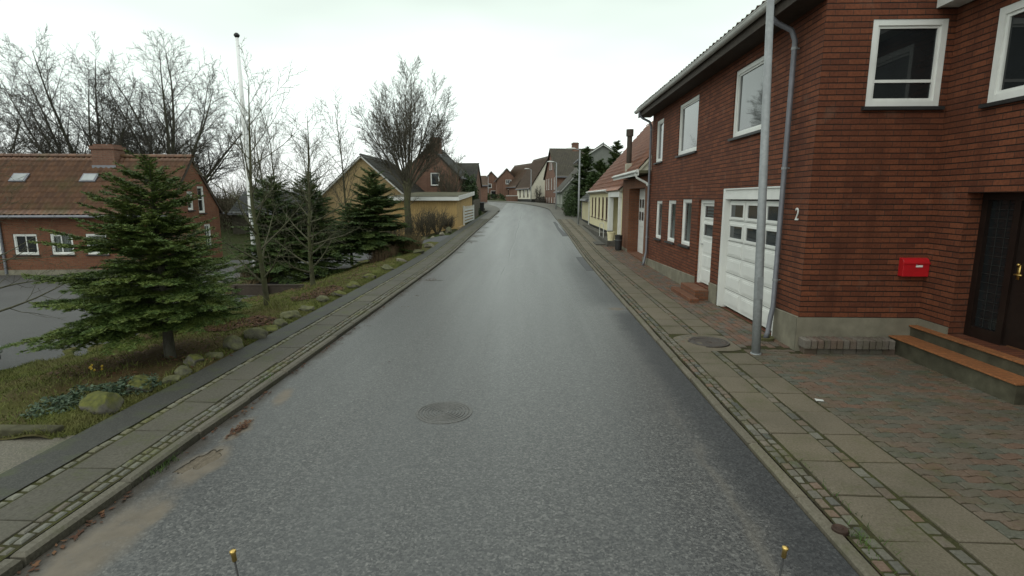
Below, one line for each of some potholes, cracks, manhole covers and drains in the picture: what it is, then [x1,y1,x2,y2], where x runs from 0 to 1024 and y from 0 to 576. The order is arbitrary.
manhole cover [688,336,730,348]
manhole cover [416,401,473,424]
utility cover [831,524,849,540]
